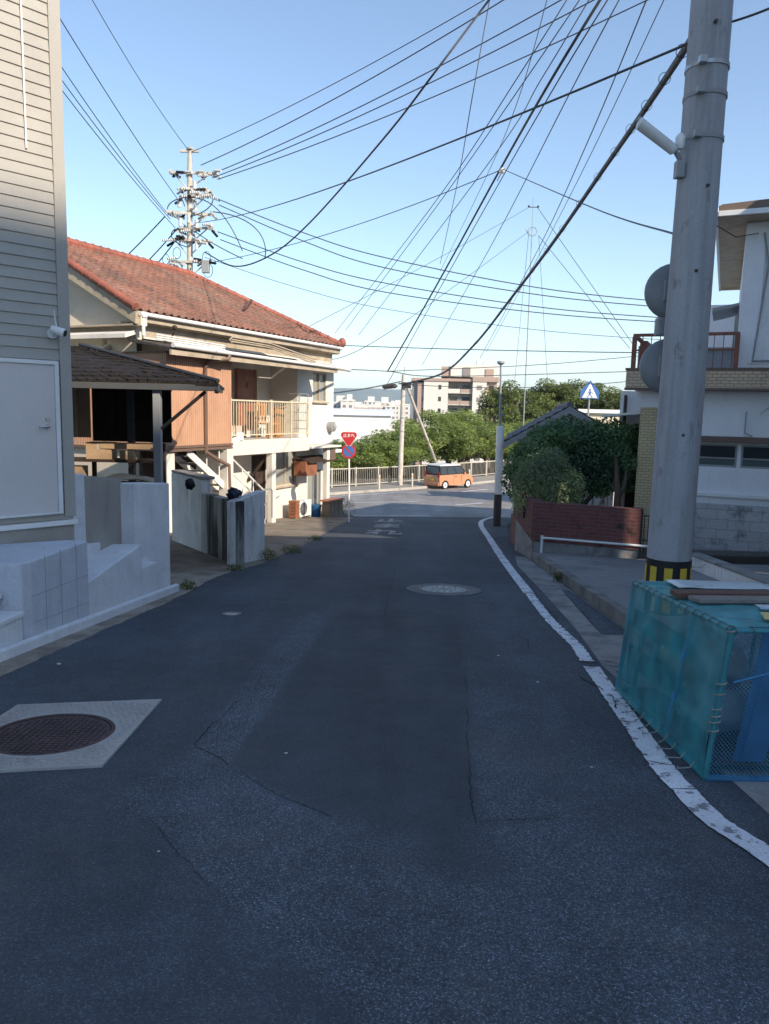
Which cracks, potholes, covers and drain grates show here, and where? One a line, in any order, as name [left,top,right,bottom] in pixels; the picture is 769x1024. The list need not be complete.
manhole cover [0,699,162,773]
crack [194,701,330,816]
manhole cover [406,583,481,596]
crack [464,665,549,822]
crack [579,661,685,766]
